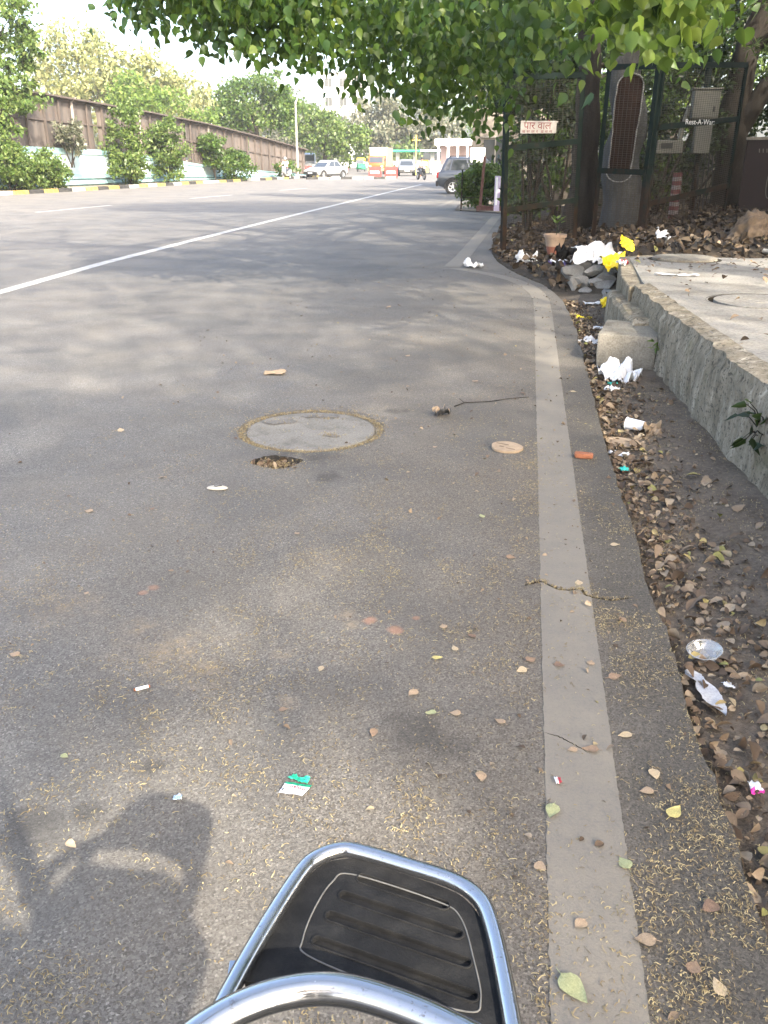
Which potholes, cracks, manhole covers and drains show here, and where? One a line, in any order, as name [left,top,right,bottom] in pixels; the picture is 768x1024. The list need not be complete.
pothole [250,455,303,469]
manhole cover [649,254,722,263]
manhole cover [706,294,768,310]
manhole cover [237,410,384,452]
